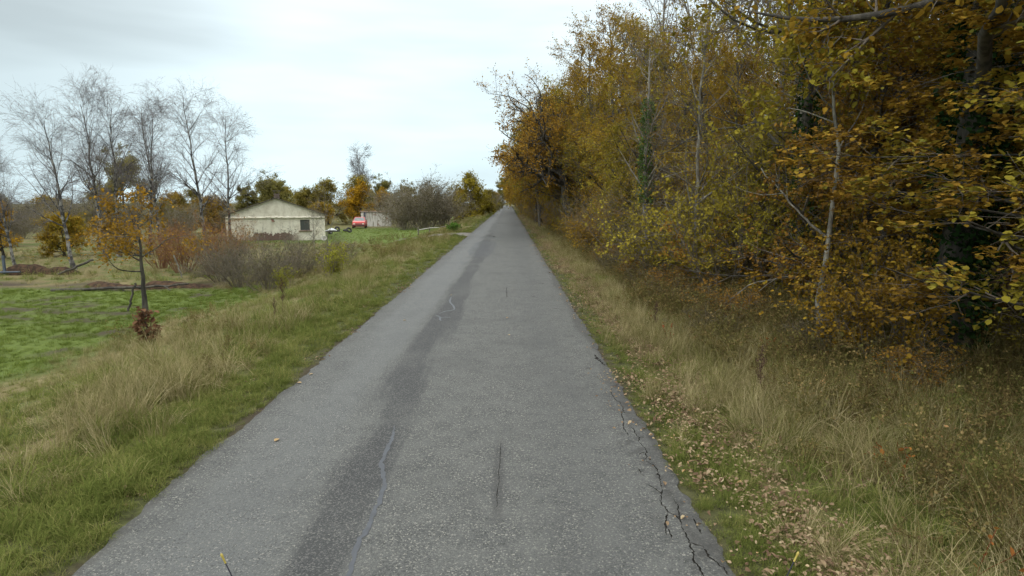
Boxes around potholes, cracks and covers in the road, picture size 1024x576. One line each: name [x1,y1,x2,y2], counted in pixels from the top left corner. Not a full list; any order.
crack [610,387,729,576]
